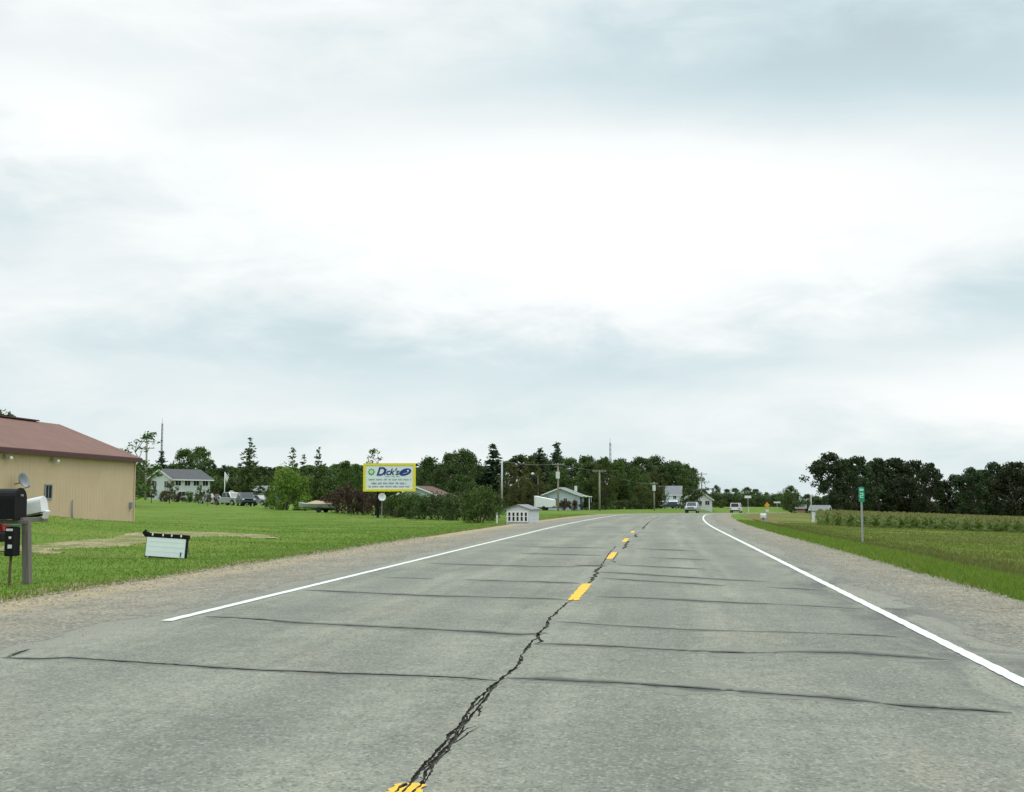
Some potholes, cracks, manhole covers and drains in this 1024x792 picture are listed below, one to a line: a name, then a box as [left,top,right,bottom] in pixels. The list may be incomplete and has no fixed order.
crack [1,516,1012,792]
